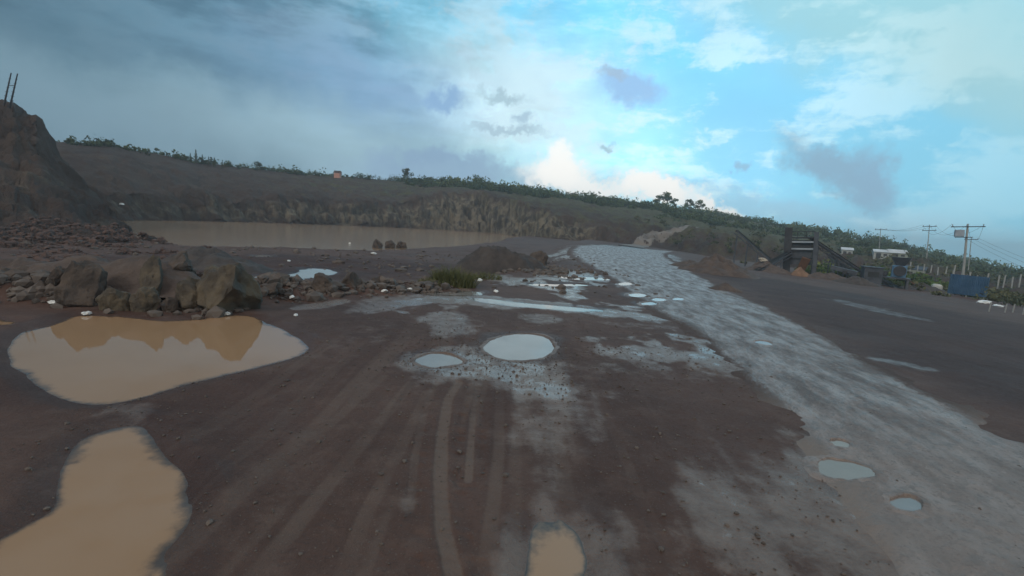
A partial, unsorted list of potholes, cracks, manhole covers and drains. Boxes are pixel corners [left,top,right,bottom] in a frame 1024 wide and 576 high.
pothole [802,454,889,483]
pothole [882,490,934,518]
pothole [479,333,560,363]
pothole [824,436,858,451]
pothole [410,351,468,369]
